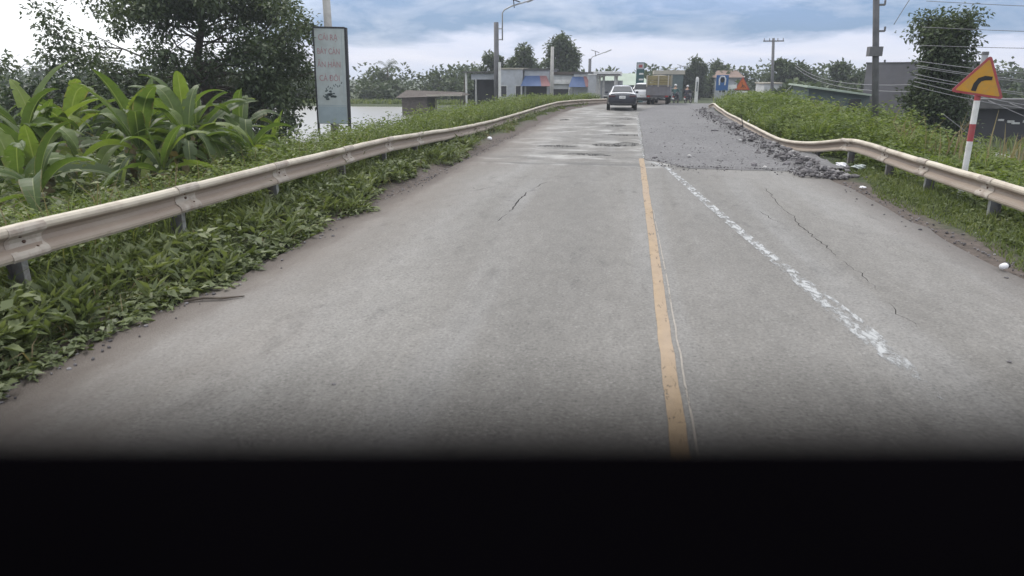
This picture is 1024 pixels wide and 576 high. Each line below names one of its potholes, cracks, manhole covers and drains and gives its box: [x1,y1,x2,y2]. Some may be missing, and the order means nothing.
crack [761,189,917,326]
